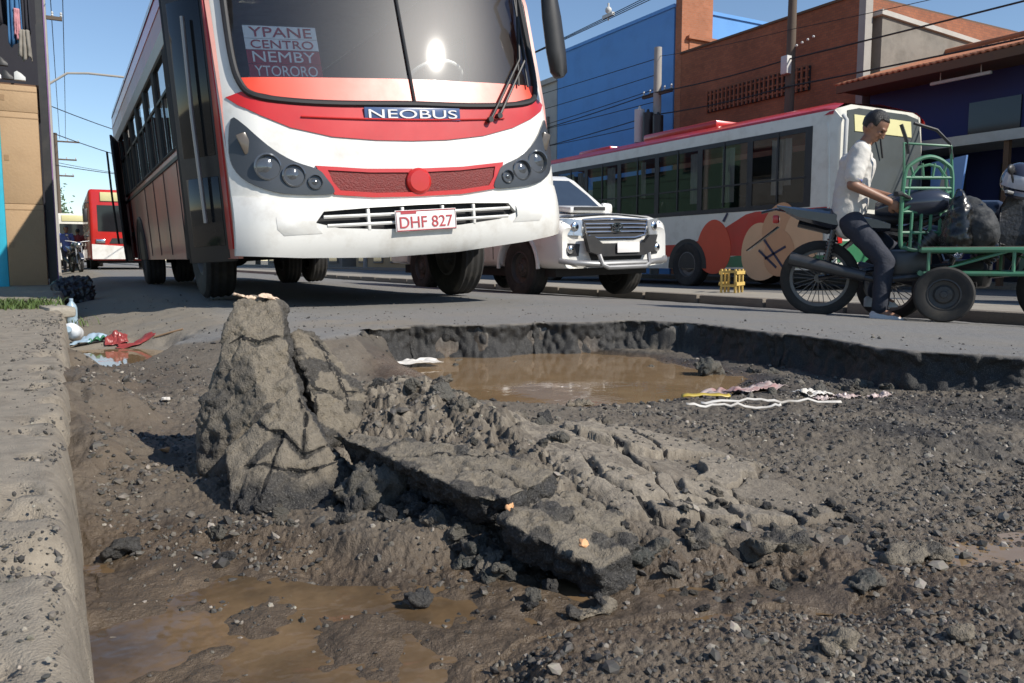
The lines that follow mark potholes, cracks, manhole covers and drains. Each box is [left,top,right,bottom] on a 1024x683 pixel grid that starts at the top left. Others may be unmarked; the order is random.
pothole [940,532,1024,573]
pothole [83,553,891,683]
pothole [342,320,1024,408]
